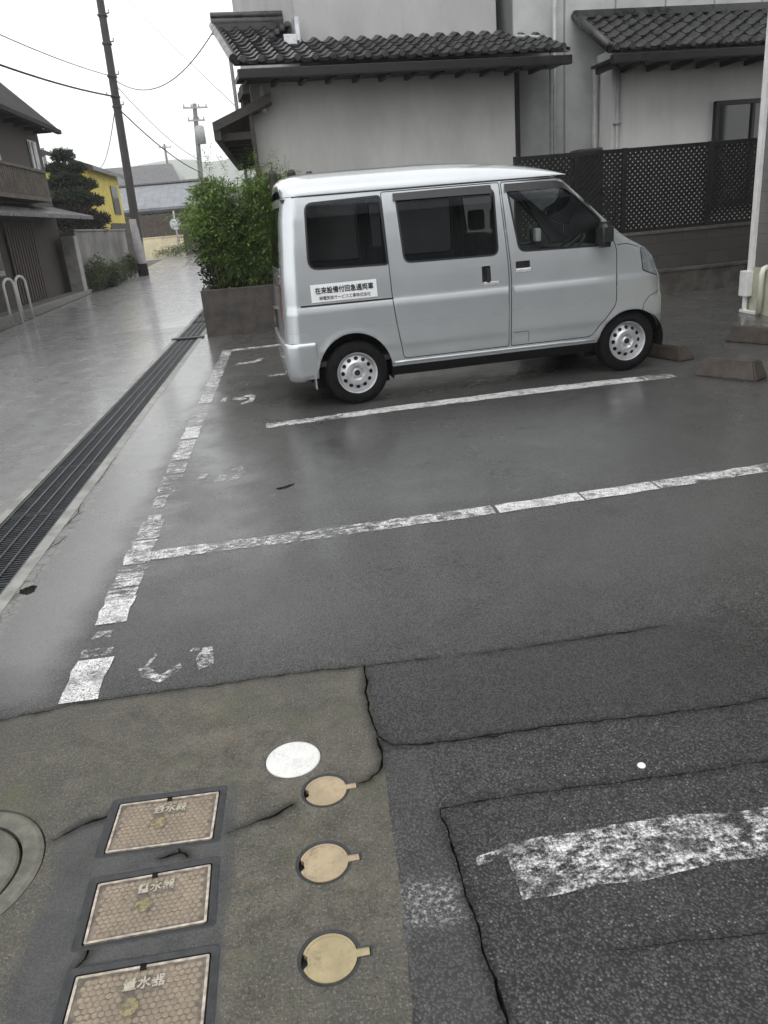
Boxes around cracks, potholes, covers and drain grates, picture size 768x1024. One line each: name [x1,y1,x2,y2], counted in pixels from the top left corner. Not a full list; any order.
crack [228,804,293,833]
manhole cover [0,810,46,916]
manhole cover [301,773,359,808]
manhole cover [71,856,221,953]
crack [440,761,768,1024]
manhole cover [297,929,374,987]
manhole cover [295,840,363,885]
crack [53,816,107,841]
manhole cover [94,785,228,859]
manhole cover [51,944,221,1024]
